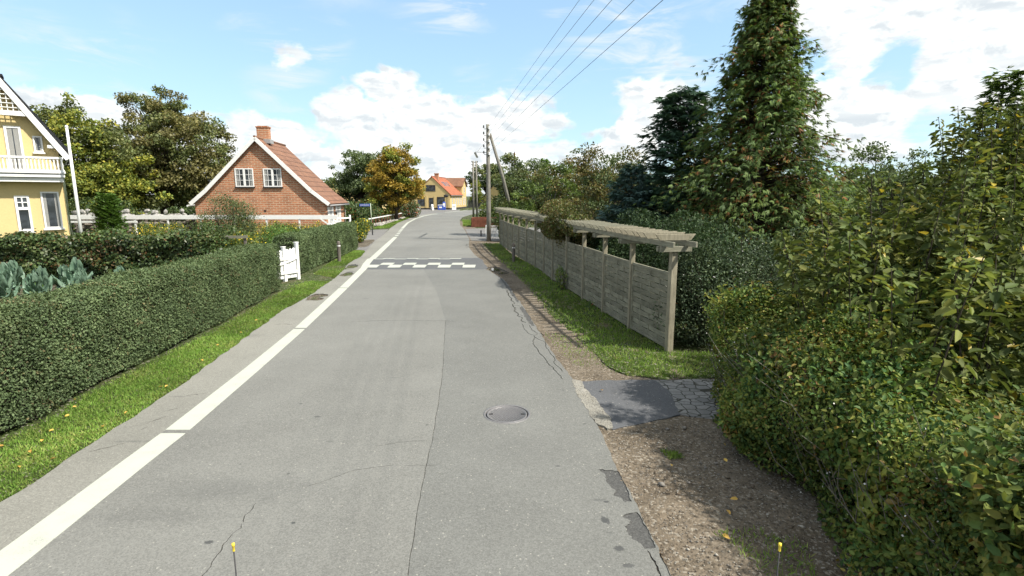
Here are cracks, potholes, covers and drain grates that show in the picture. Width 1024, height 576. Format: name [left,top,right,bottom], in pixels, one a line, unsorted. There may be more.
manhole cover [483,405,531,424]
crack [507,292,562,375]
